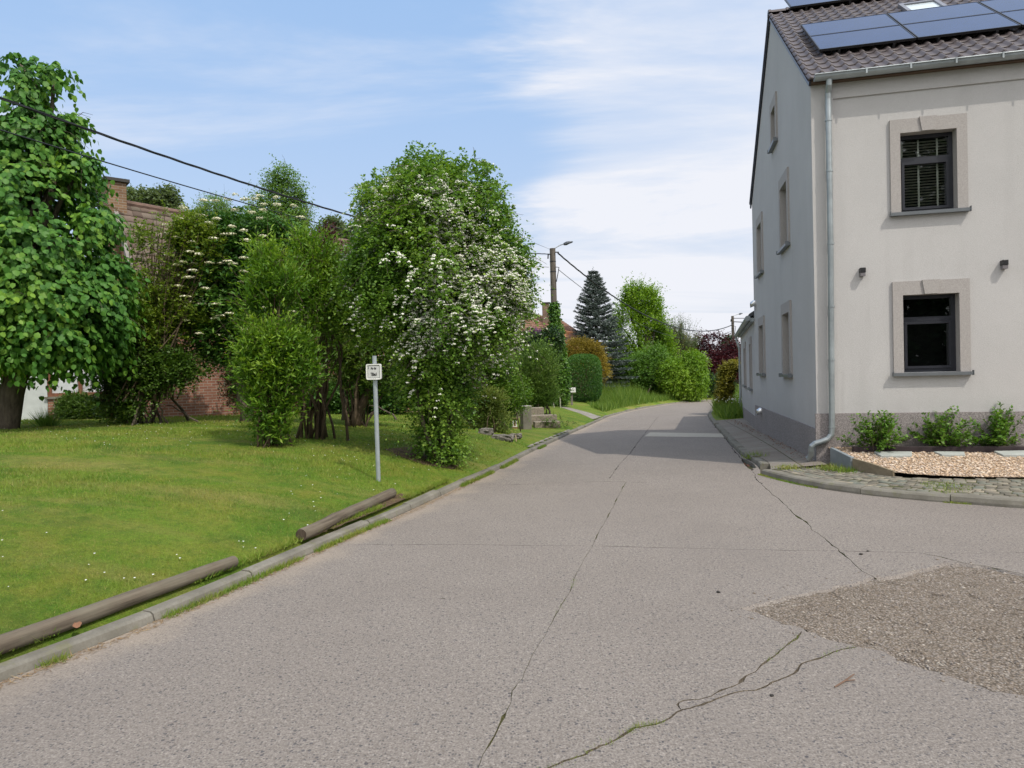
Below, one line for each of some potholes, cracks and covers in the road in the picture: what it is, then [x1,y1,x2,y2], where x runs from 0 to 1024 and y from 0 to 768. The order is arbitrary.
crack [368,418,1021,768]
